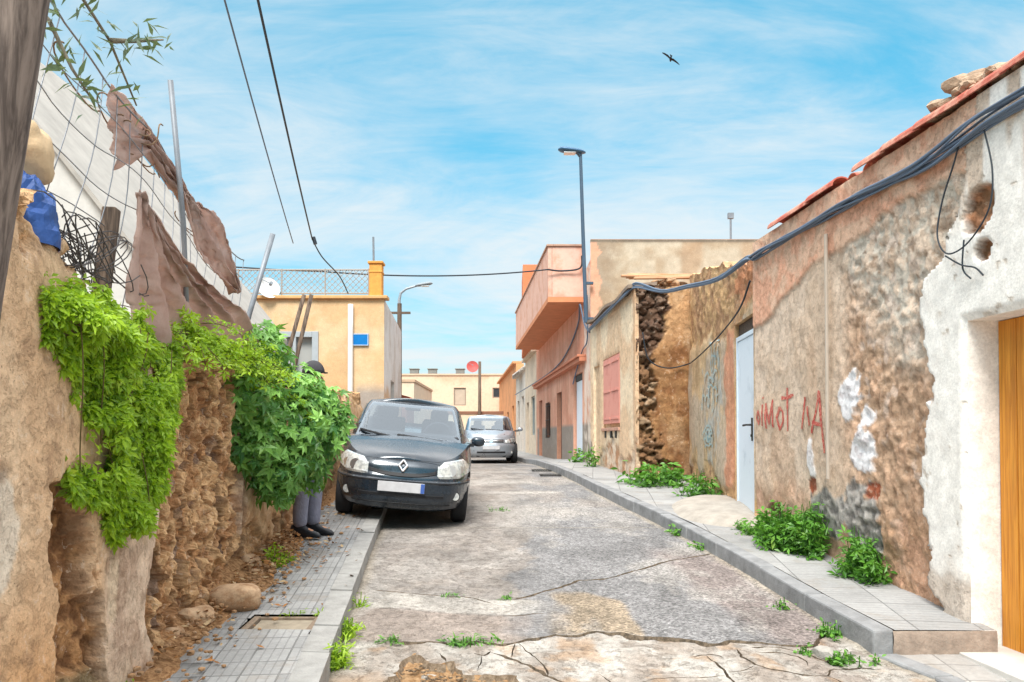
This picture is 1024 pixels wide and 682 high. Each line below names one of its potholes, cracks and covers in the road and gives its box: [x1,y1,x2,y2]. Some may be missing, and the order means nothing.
pothole [383,653,519,682]
crack [377,554,878,682]
manhole cover [241,616,318,634]
